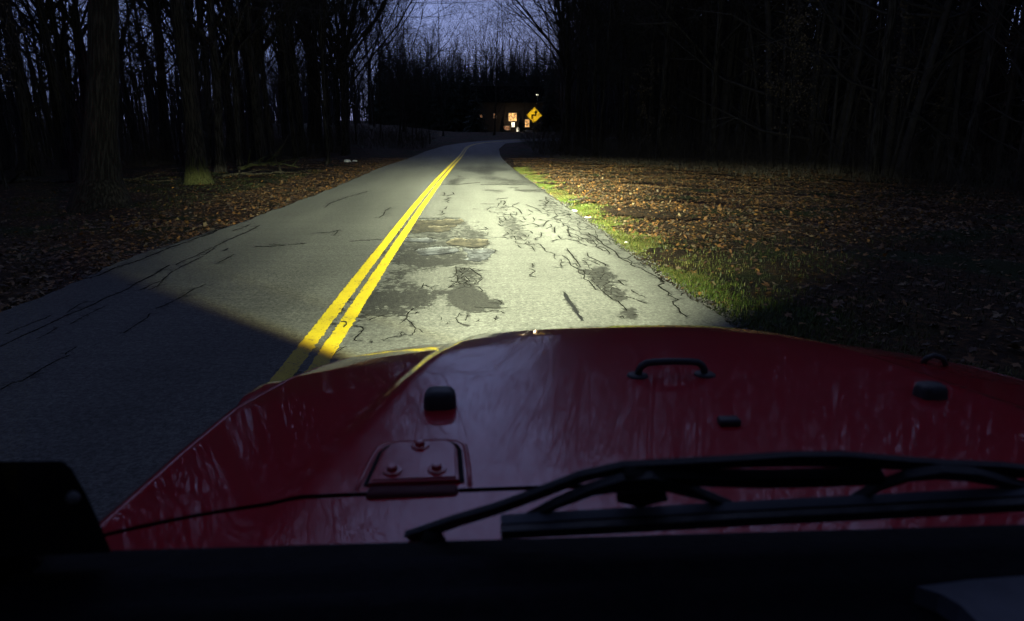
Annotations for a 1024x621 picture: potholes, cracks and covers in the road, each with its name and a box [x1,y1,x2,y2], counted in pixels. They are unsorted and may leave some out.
crack [407,180,687,326]
crack [0,347,76,390]
pothole [411,219,464,234]
crack [334,308,422,354]
pothole [446,238,489,248]
crack [0,224,305,347]
